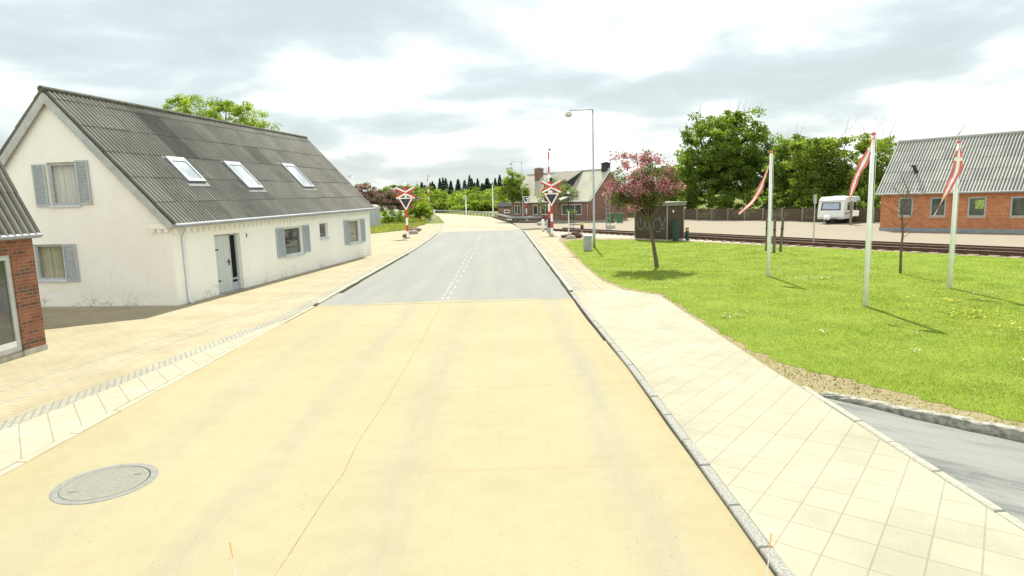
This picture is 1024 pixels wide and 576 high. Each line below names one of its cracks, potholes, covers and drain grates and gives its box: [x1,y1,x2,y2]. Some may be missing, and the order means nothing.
manhole cover [49,463,159,505]
